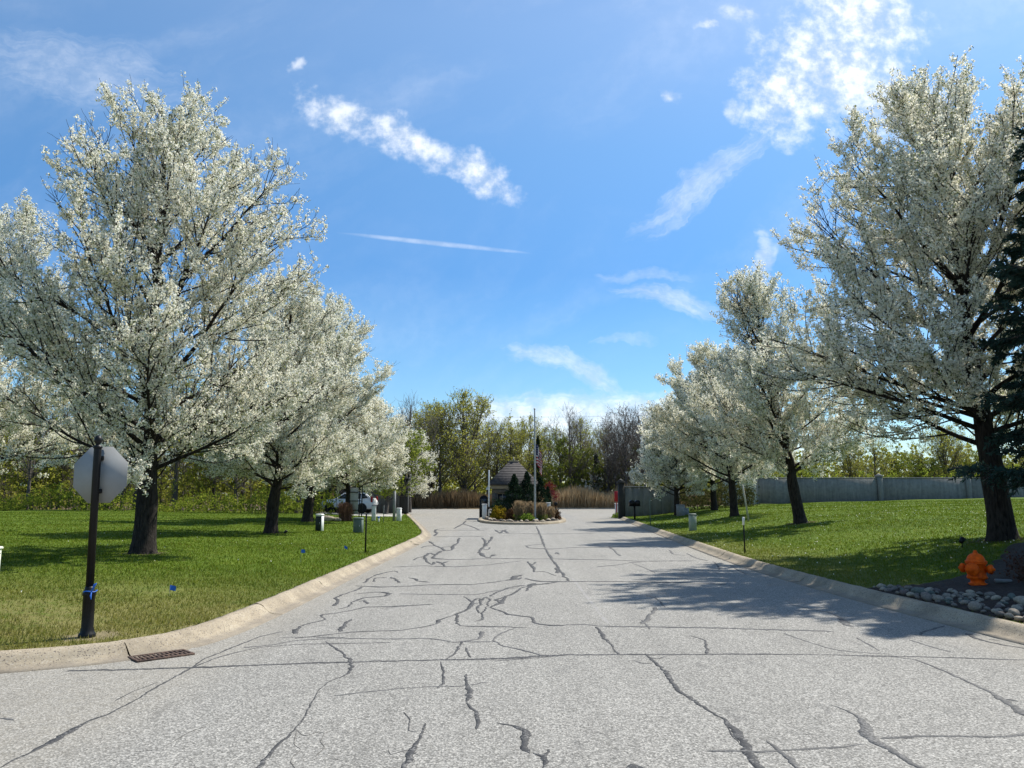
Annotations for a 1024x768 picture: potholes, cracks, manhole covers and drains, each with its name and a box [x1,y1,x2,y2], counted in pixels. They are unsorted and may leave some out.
crack [243,521,746,696]
crack [784,604,1024,716]
crack [290,730,330,768]
